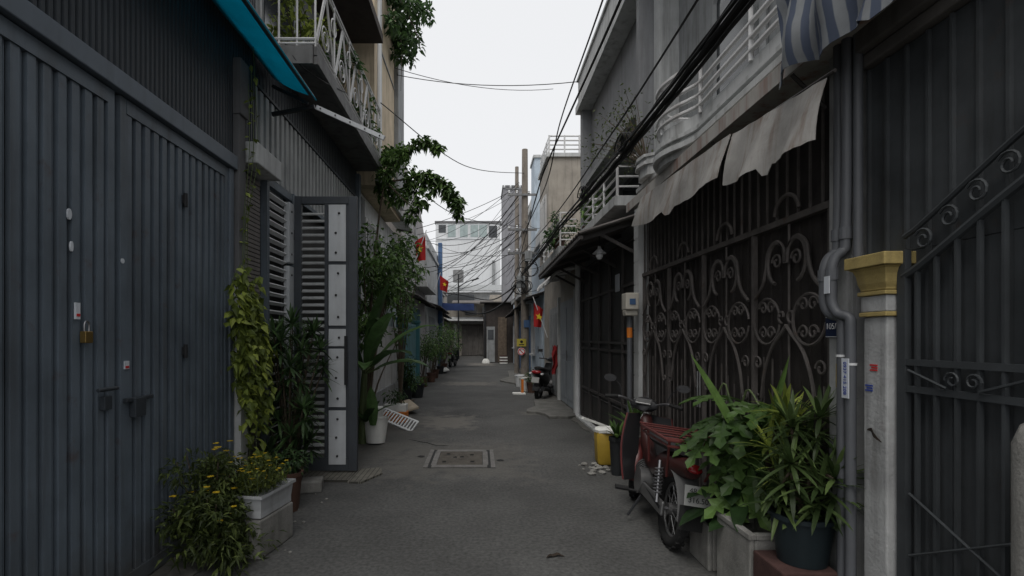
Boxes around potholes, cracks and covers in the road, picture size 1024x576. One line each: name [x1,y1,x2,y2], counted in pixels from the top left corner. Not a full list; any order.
manhole cover [418,450,504,468]
